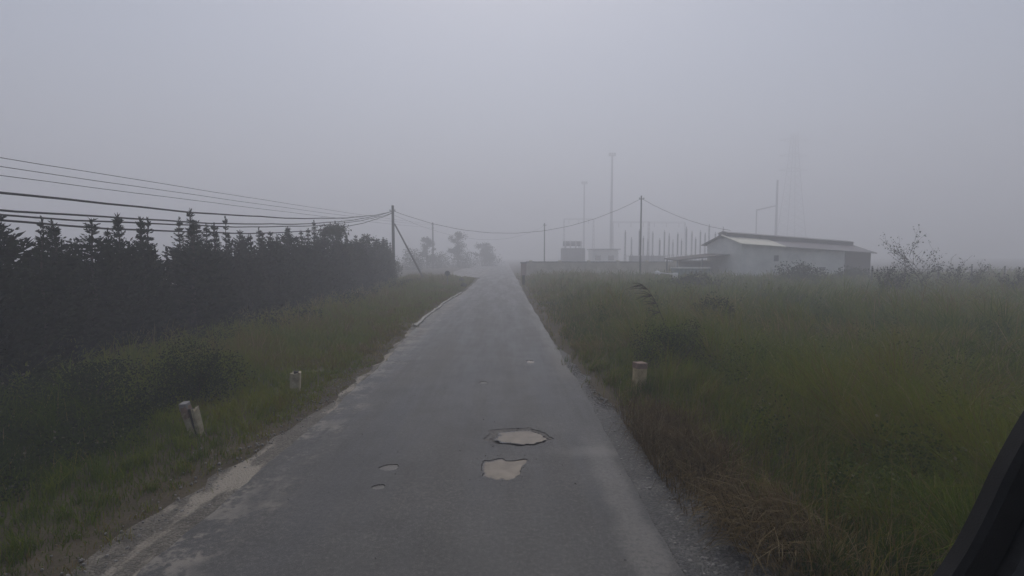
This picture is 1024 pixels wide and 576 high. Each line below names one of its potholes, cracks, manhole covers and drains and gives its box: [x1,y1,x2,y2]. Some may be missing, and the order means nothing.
pothole [483,427,554,446]
pothole [481,458,528,481]
